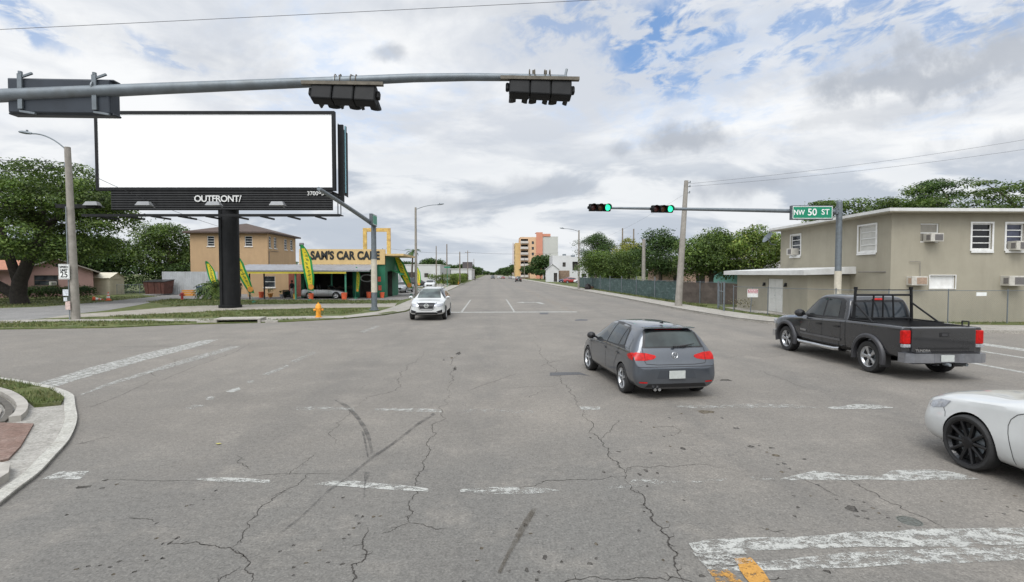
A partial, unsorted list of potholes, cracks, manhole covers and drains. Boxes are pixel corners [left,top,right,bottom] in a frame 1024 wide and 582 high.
crack [171,455,317,582]
manhole cover [896,516,924,526]
crack [351,353,457,582]
crack [508,337,715,582]
